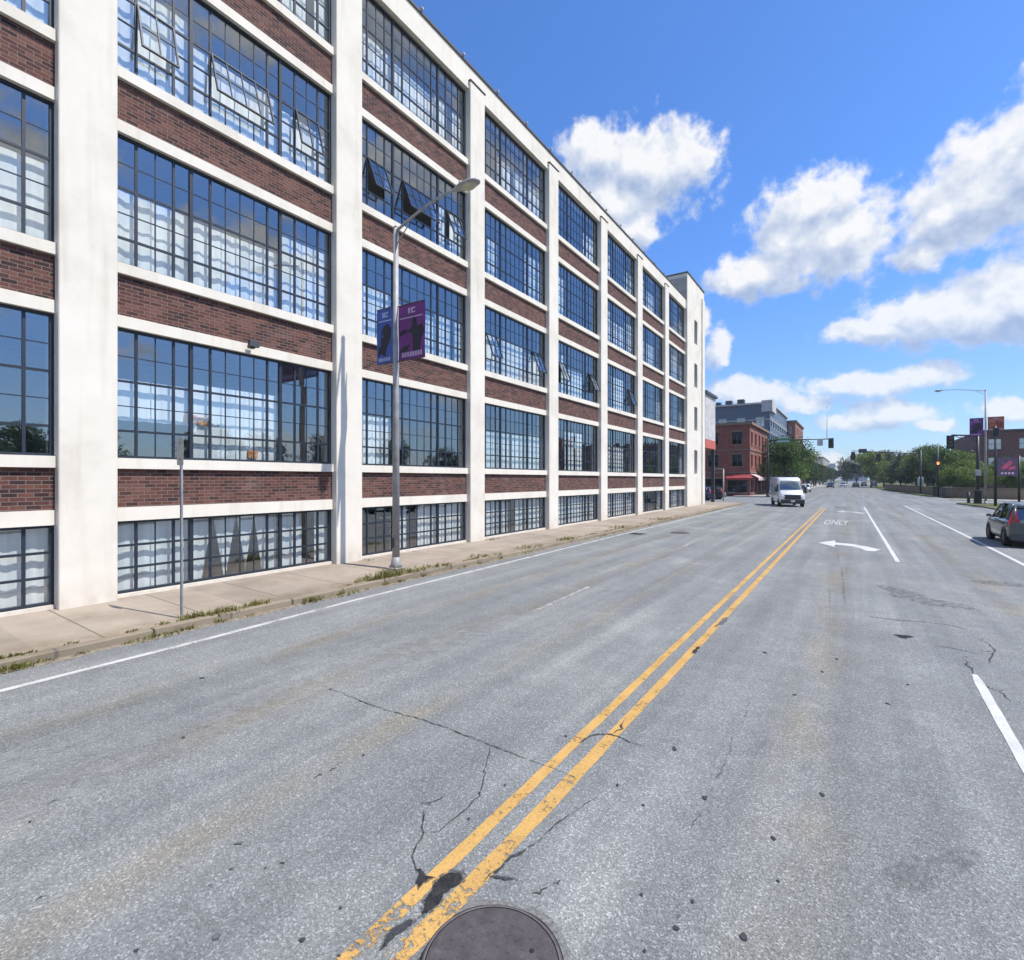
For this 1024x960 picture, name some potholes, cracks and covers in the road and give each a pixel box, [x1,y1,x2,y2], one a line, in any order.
pothole [379,918,417,950]
crack [580,721,643,746]
crack [870,616,1011,701]
crack [332,689,565,872]
crack [490,875,560,894]
pothole [418,868,466,918]
manhole cover [409,899,570,960]
